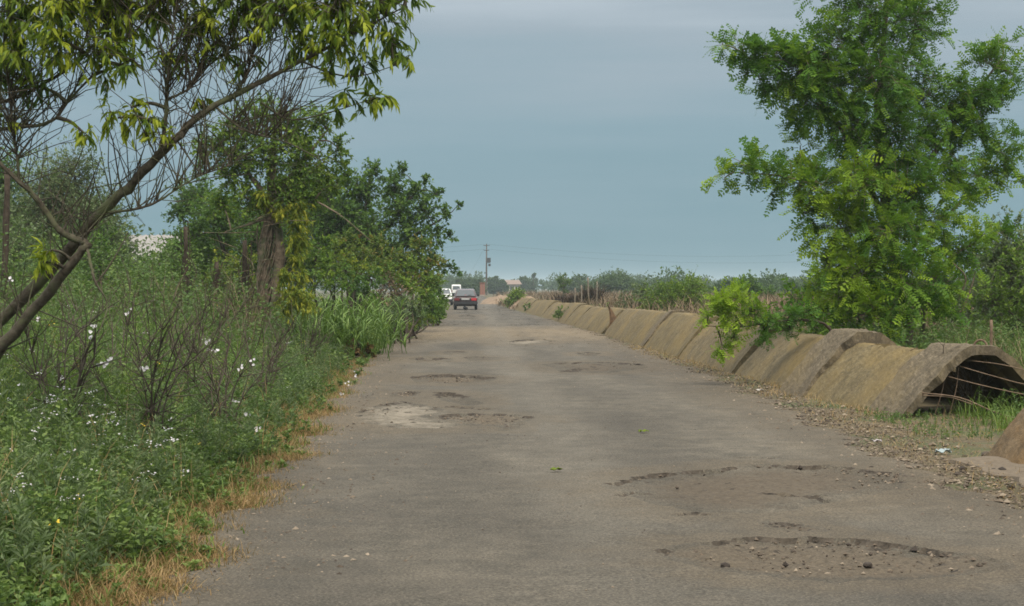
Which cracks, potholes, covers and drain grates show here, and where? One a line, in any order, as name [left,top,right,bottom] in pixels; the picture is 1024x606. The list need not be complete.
pothole [354,401,459,429]
pothole [654,536,1018,583]
pothole [436,413,534,426]
pothole [759,521,832,532]
pothole [602,464,905,515]
pothole [410,374,498,384]
pothole [539,362,649,373]
pothole [433,392,486,406]
